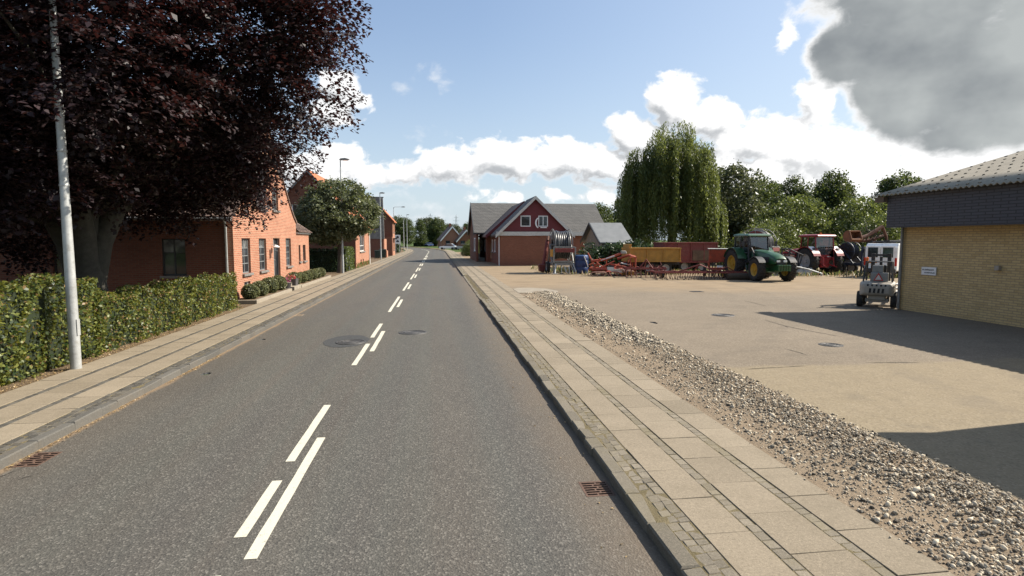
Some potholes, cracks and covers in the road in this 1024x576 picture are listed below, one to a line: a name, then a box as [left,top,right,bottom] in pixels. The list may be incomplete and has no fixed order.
drain grate [578,481,616,497]
drain grate [10,451,63,468]
